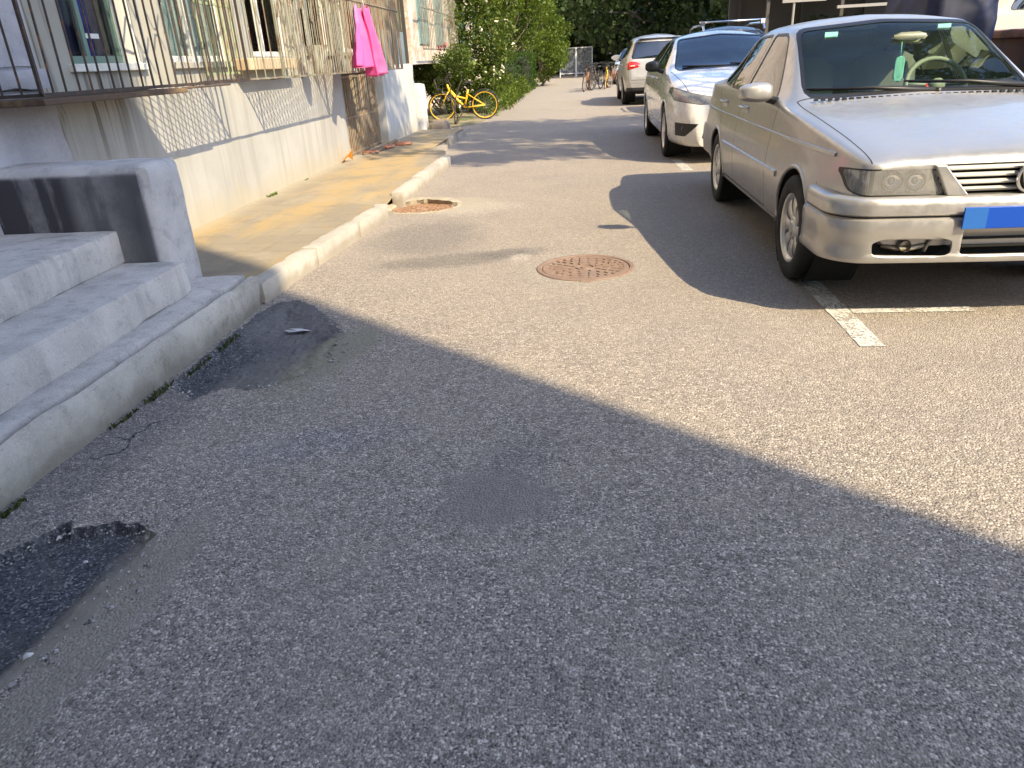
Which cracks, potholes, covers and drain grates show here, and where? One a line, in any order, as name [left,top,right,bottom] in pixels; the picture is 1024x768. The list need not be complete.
crack [89,420,162,460]
manhole cover [537,254,635,282]
manhole cover [388,196,462,214]
